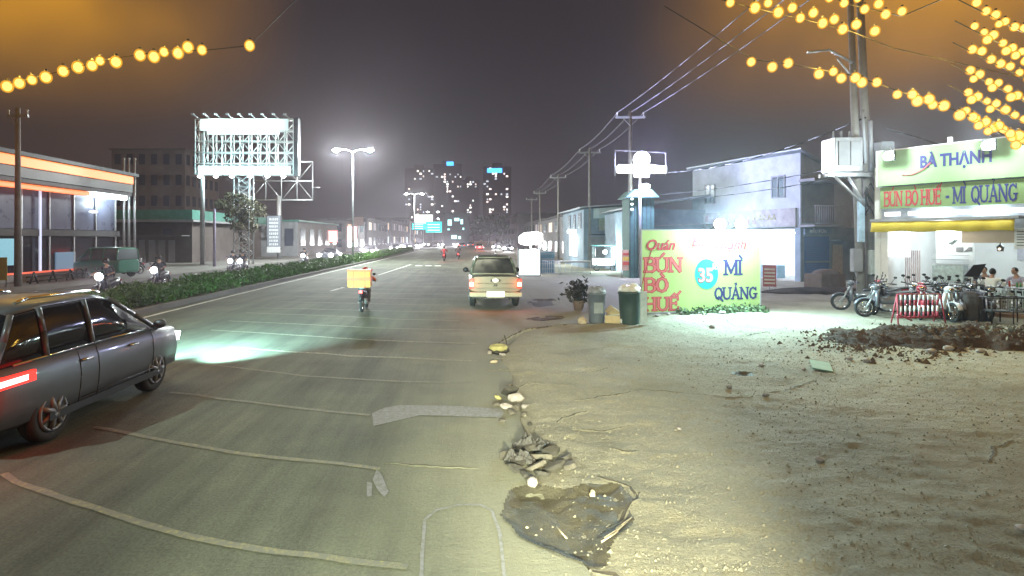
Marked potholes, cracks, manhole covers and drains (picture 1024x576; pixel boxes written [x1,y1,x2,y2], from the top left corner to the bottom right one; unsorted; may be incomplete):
pothole [500,482,635,567]
crack [556,389,750,454]
